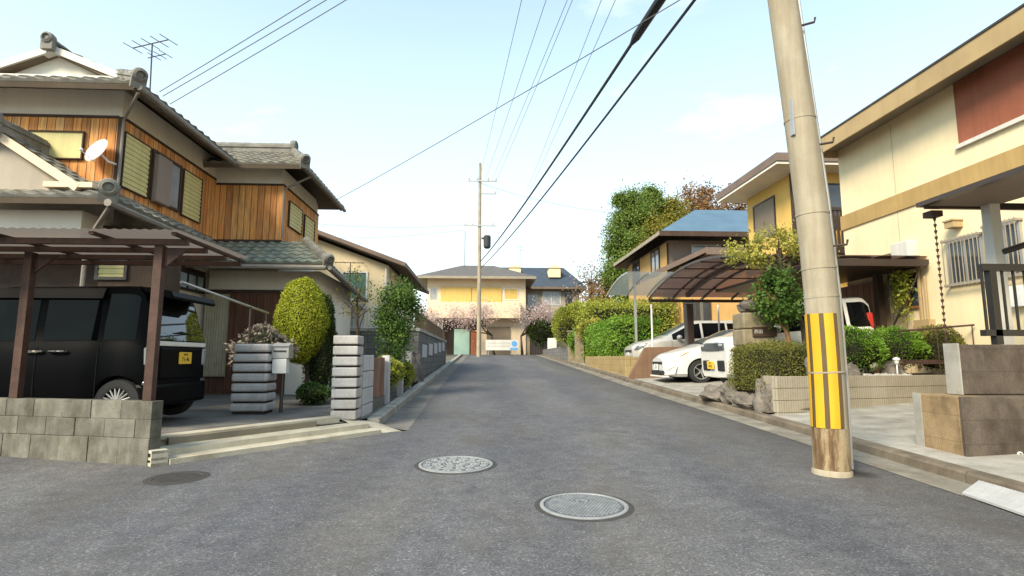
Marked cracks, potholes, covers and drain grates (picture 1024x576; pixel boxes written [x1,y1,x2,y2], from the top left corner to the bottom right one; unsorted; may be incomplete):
manhole cover [414,456,497,475]
manhole cover [142,471,211,486]
manhole cover [534,492,635,522]
